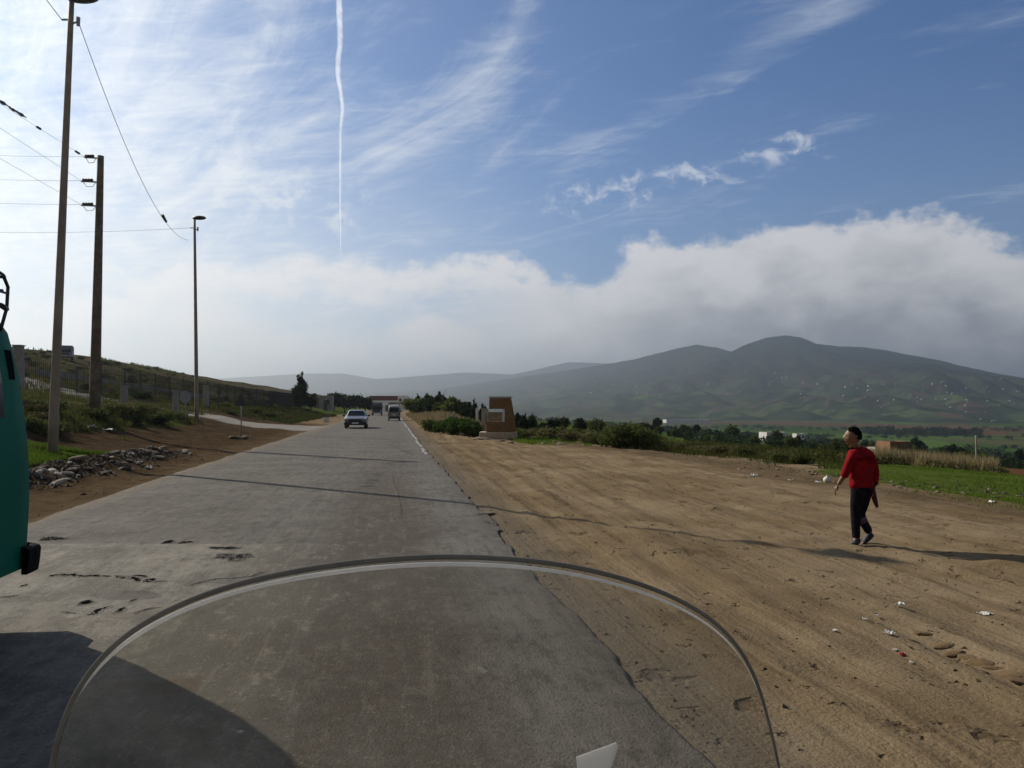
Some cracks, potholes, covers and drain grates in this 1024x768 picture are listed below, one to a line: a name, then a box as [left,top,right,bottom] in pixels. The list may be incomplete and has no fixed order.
crack [477,512,501,531]
crack [52,573,165,583]
pothole [212,553,257,562]
crack [190,572,264,585]
